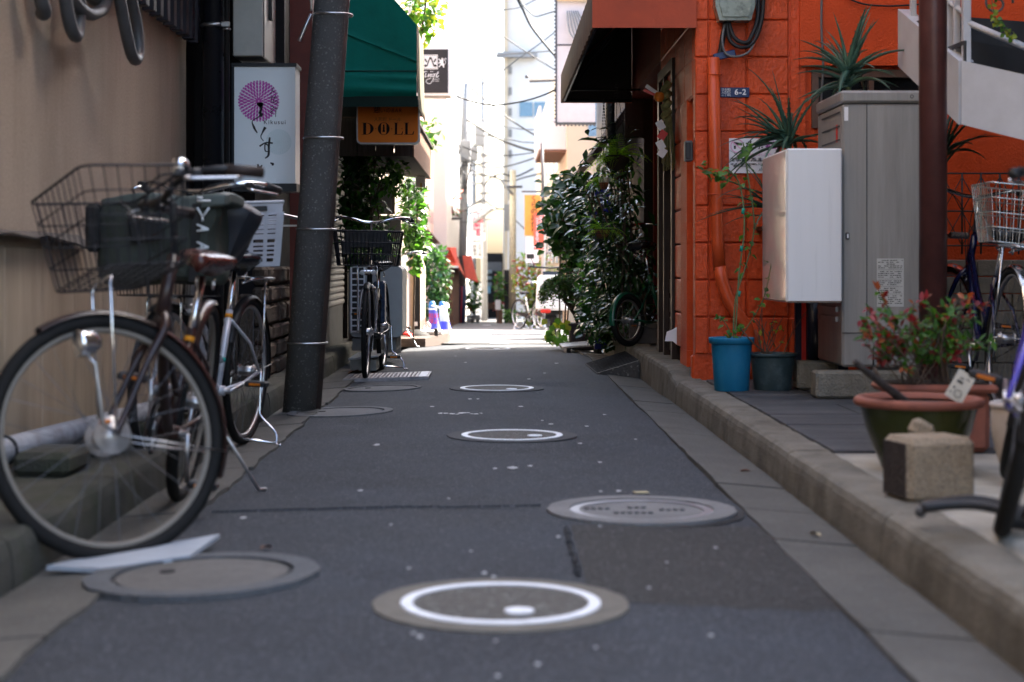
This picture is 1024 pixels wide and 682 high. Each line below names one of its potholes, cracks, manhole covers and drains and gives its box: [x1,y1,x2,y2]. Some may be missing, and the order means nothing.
manhole cover [449,384,544,392]
manhole cover [372,578,629,634]
manhole cover [546,495,746,528]
manhole cover [447,428,577,443]
manhole cover [82,552,321,603]
drain grate [343,371,432,382]
manhole cover [287,406,393,418]
manhole cover [344,384,421,392]
